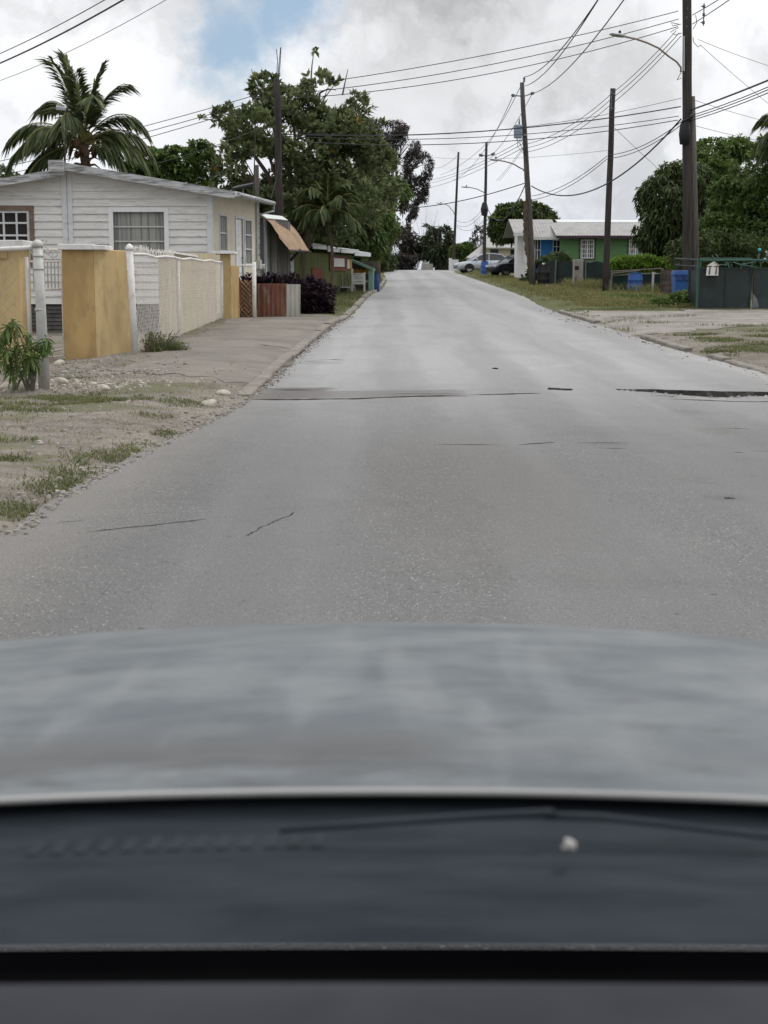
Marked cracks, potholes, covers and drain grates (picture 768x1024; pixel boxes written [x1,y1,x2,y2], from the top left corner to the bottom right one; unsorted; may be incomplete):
crack [68,512,204,532]
crack [244,512,294,537]
